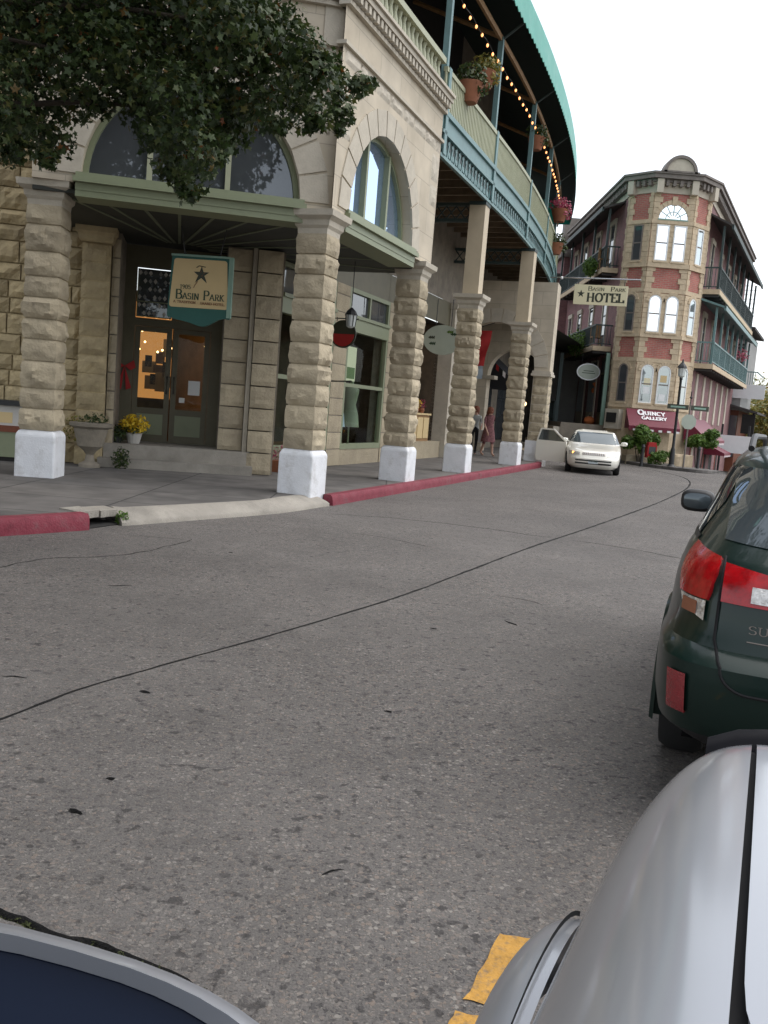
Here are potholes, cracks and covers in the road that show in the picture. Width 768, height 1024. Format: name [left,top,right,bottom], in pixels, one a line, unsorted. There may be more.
drain grate [59,506,118,529]
crack [0,464,691,721]
